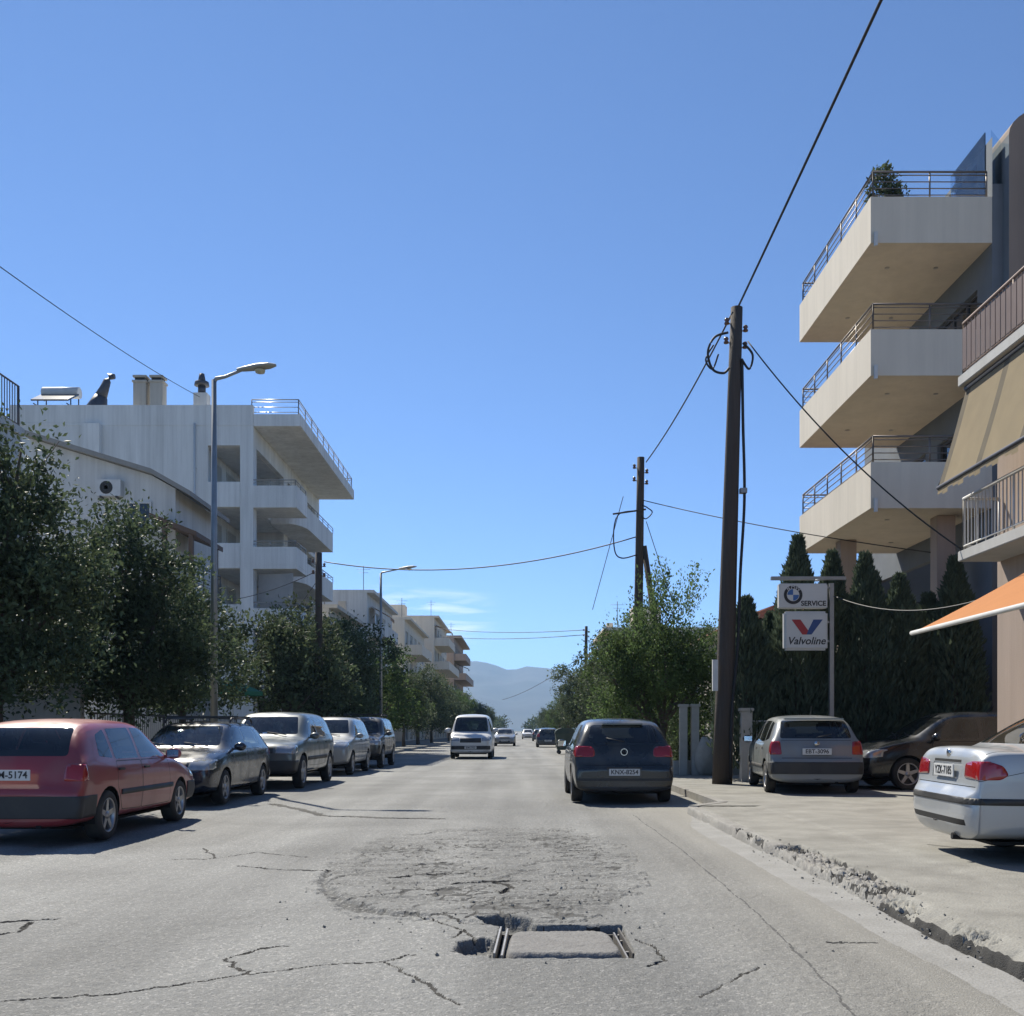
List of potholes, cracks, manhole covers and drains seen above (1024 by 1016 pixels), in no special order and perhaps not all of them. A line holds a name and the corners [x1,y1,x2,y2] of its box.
pothole [454,938,495,958]
crack [172,848,331,873]
crack [635,939,669,967]
crack [698,967,760,998]
crack [0,918,61,935]
crack [1,946,461,1006]
manhole cover [493,926,634,959]
pothole [477,915,537,934]
